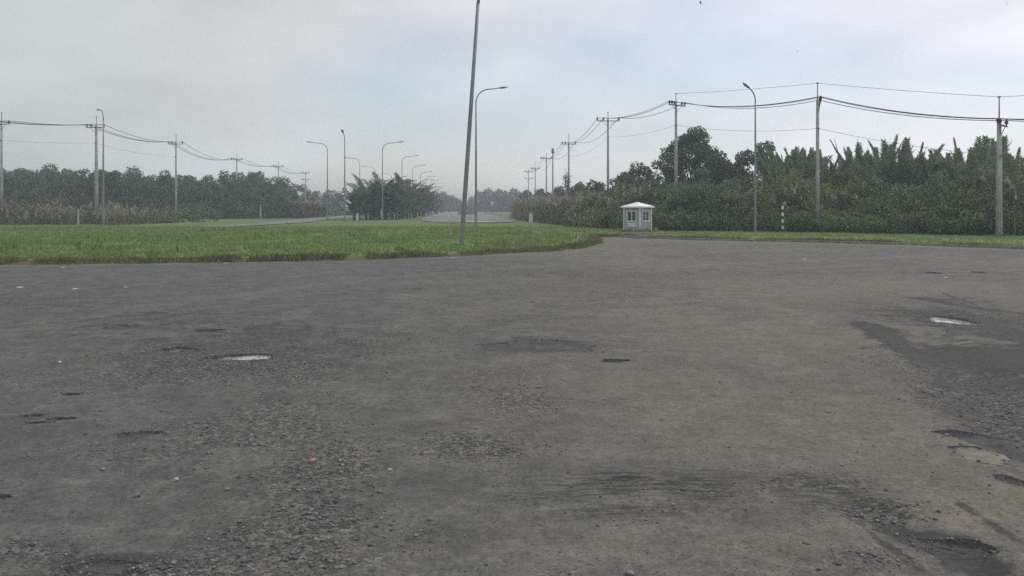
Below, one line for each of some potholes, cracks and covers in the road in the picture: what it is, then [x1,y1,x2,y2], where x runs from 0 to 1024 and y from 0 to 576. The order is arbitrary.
pothole [924,315,979,325]
pothole [115,431,164,439]
pothole [993,474,1024,487]
pothole [932,429,1024,452]
pothole [905,538,999,555]
pothole [467,339,596,353]
